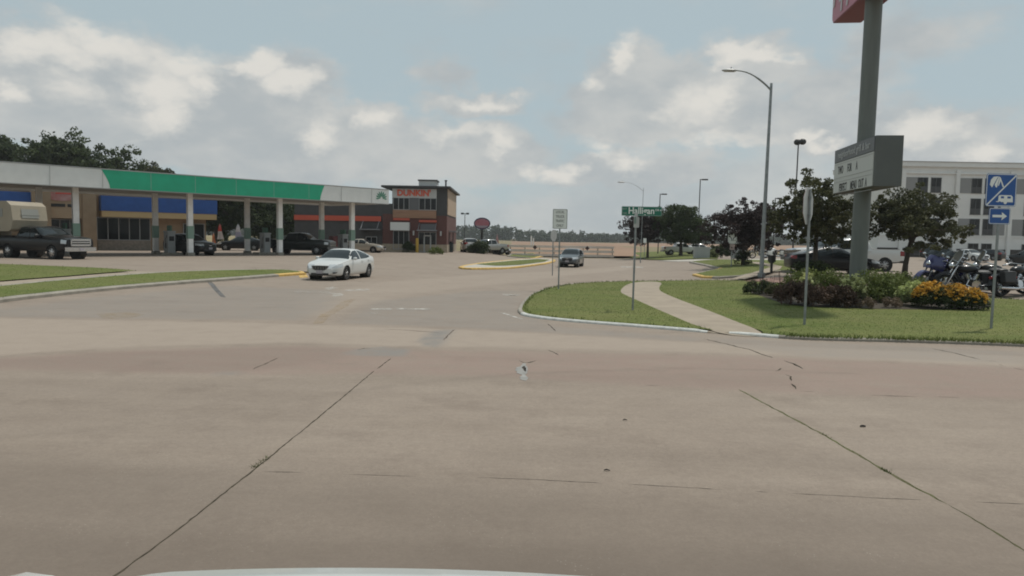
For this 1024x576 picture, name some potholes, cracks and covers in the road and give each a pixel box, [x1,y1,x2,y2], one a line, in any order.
crack [707,339,803,389]
